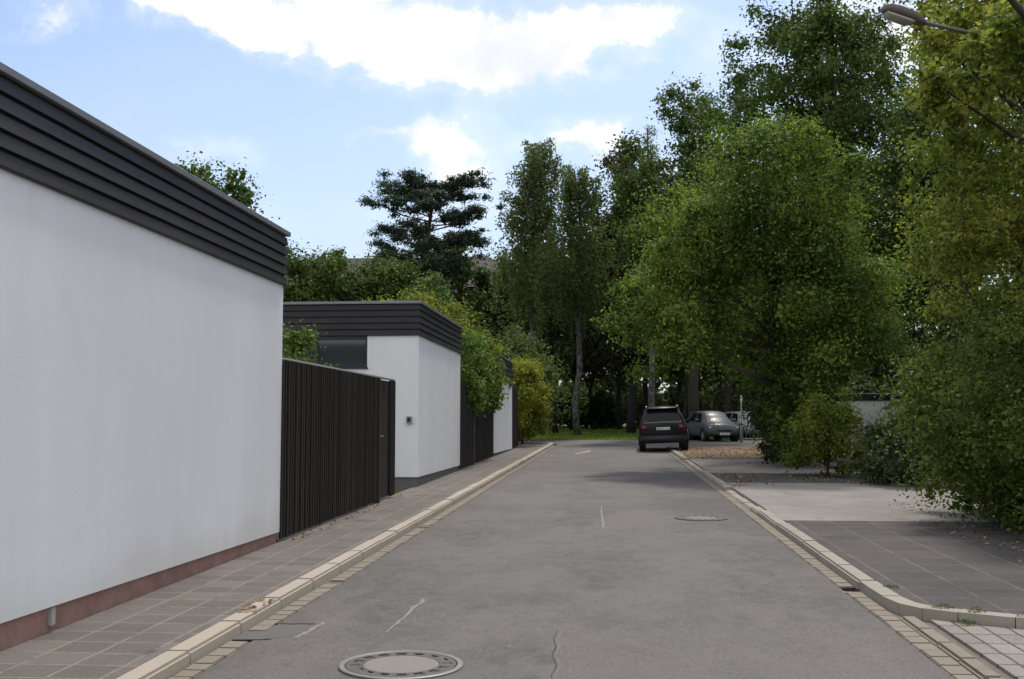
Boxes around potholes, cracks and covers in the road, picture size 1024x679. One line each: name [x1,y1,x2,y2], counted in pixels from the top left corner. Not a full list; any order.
crack [338,598,425,632]
manhole cover [338,650,463,679]
crack [550,629,570,679]
crack [294,622,325,637]
crack [597,506,612,528]
